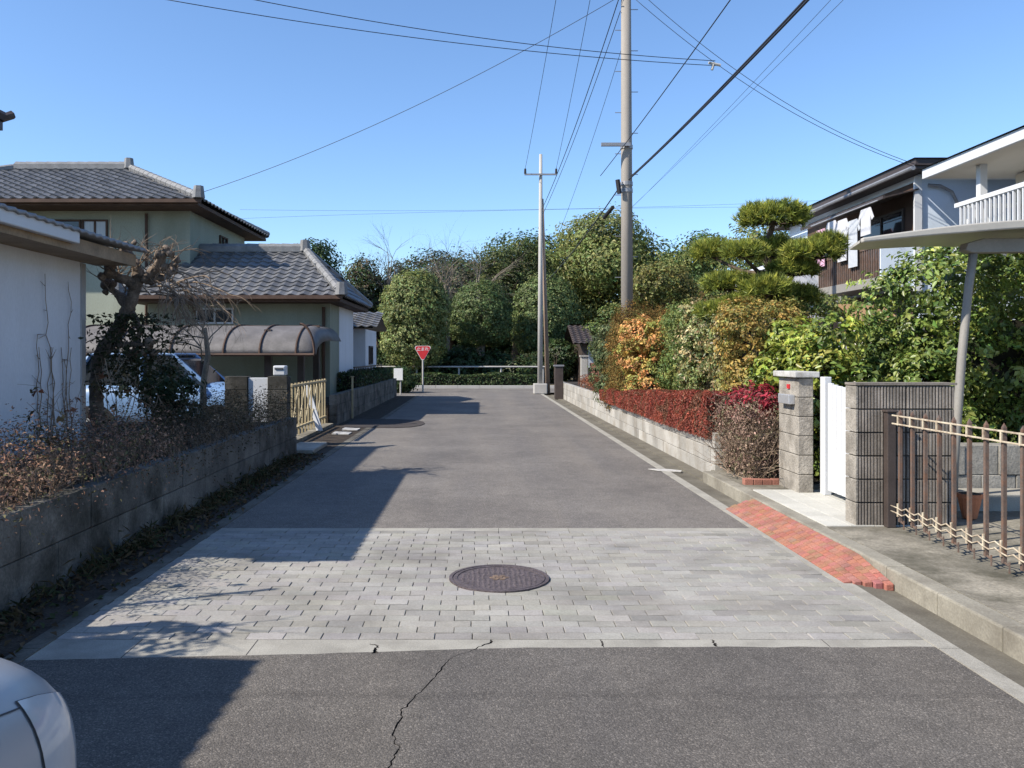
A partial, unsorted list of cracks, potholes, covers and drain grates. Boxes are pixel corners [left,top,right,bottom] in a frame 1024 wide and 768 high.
crack [385,639,494,768]
manhole cover [449,564,549,594]
